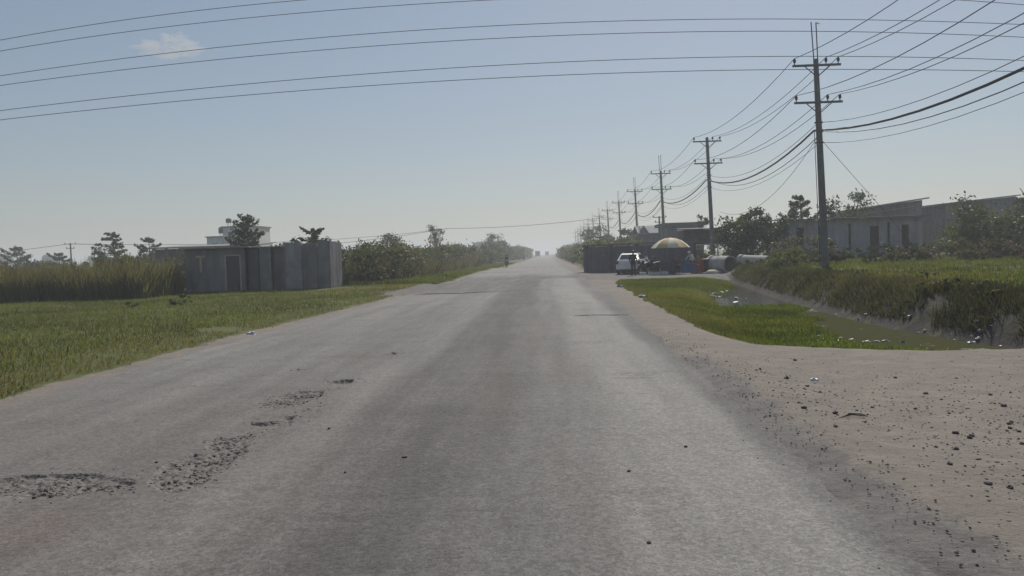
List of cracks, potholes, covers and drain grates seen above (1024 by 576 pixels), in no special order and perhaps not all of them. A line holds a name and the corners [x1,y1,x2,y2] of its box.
pothole [0,468,139,503]
pothole [244,415,301,430]
pothole [123,431,269,501]
pothole [257,388,338,408]
